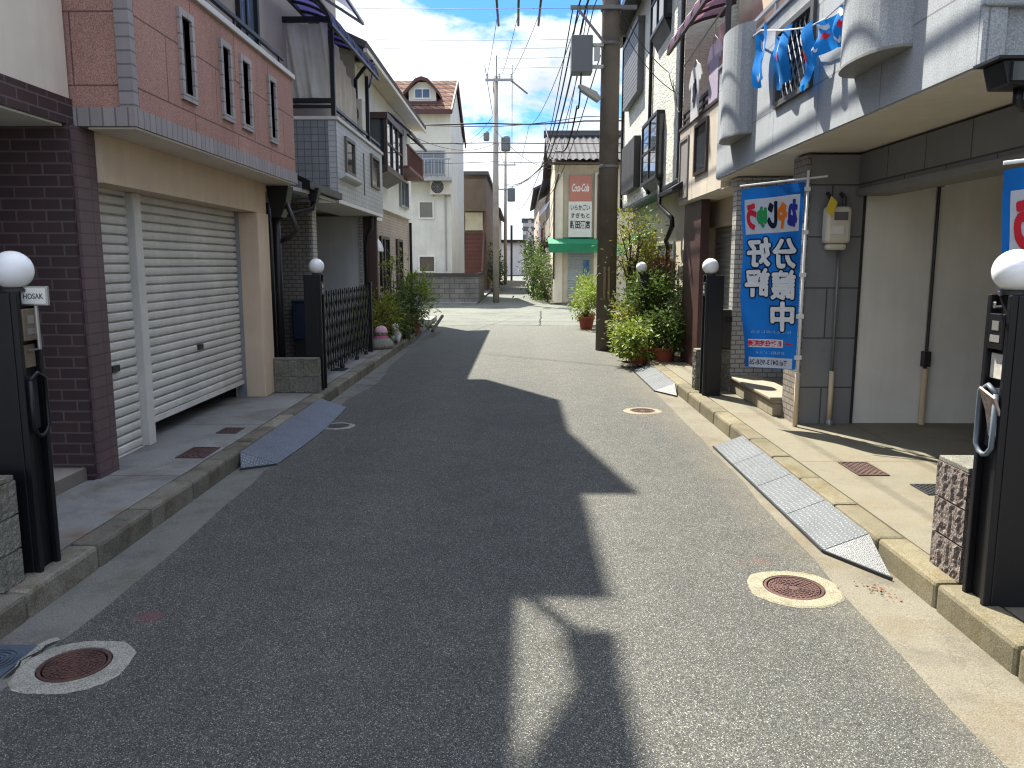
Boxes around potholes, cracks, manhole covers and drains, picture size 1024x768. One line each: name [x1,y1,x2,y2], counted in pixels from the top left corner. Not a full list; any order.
manhole cover [325,422,355,430]
manhole cover [623,407,662,415]
manhole cover [8,641,136,694]
manhole cover [747,571,845,609]
